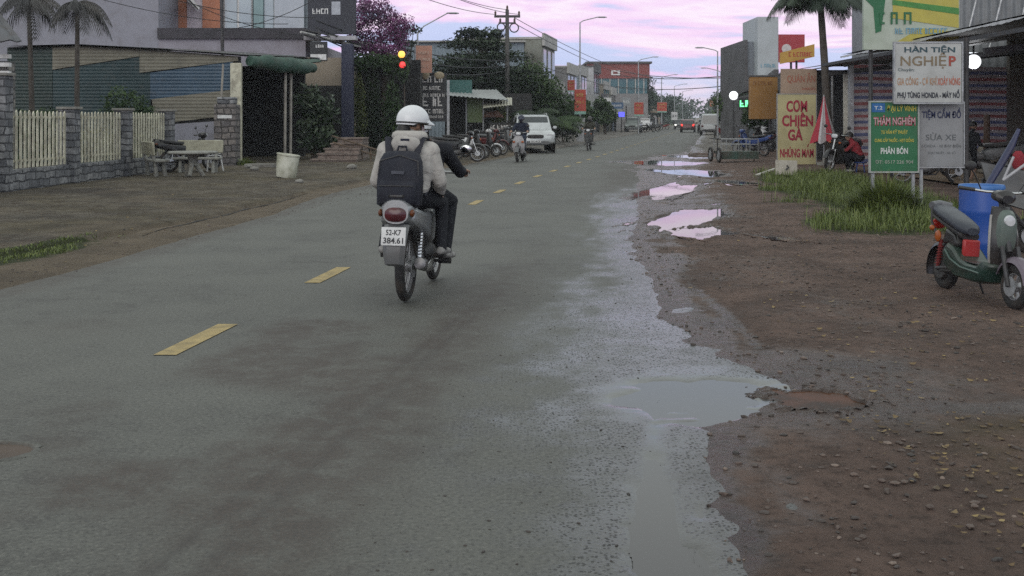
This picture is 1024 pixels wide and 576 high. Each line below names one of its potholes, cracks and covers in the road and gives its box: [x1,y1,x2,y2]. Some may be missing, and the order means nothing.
pothole [745,386,891,418]
pothole [0,440,42,462]
